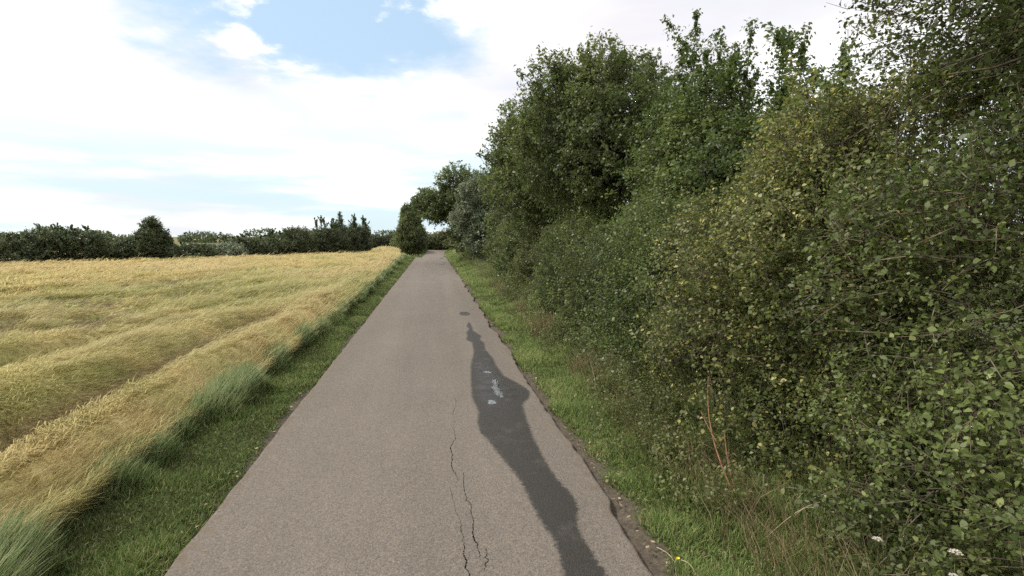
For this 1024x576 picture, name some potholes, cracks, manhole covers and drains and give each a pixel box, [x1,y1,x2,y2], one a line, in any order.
crack [450,398,489,576]
